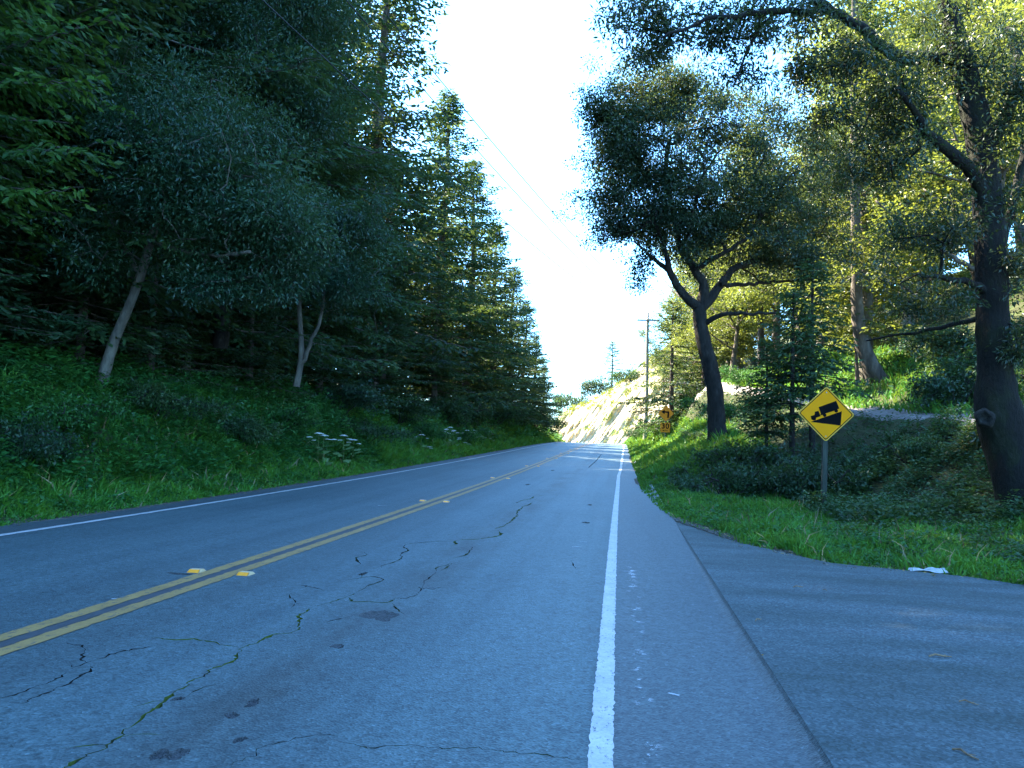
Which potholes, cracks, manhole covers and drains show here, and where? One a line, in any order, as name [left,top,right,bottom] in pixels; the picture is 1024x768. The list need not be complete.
crack [64,496,534,768]
crack [2,643,149,704]
